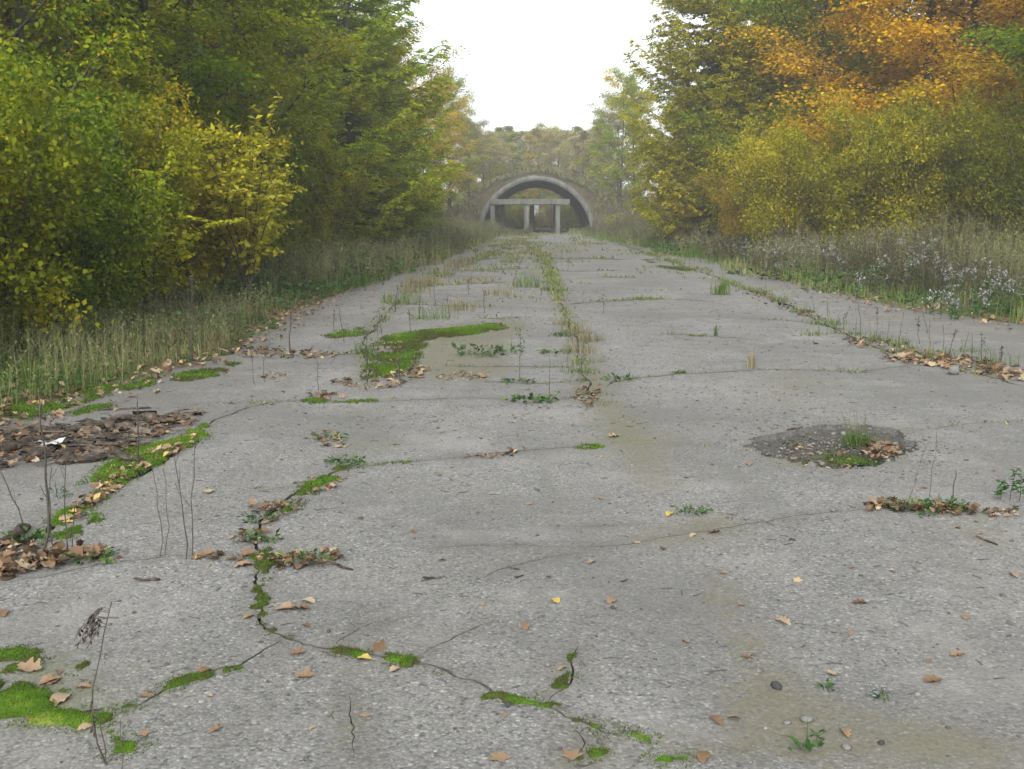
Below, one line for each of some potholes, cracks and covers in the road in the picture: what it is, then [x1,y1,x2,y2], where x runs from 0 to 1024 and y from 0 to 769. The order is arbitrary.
pothole [743,424,920,469]
crack [368,446,575,467]
crack [8,468,626,753]
